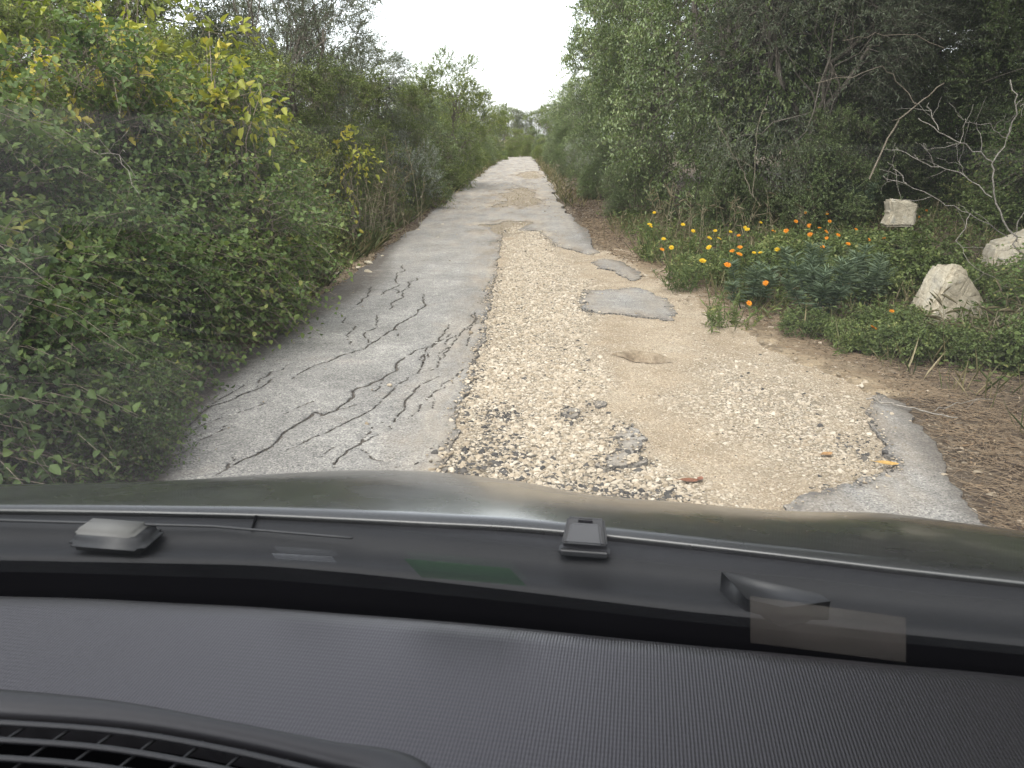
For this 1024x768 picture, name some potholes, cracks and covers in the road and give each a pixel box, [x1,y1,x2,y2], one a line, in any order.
pothole [481,221,532,238]
crack [174,372,271,457]
pothole [447,225,892,511]
crack [218,268,478,475]
